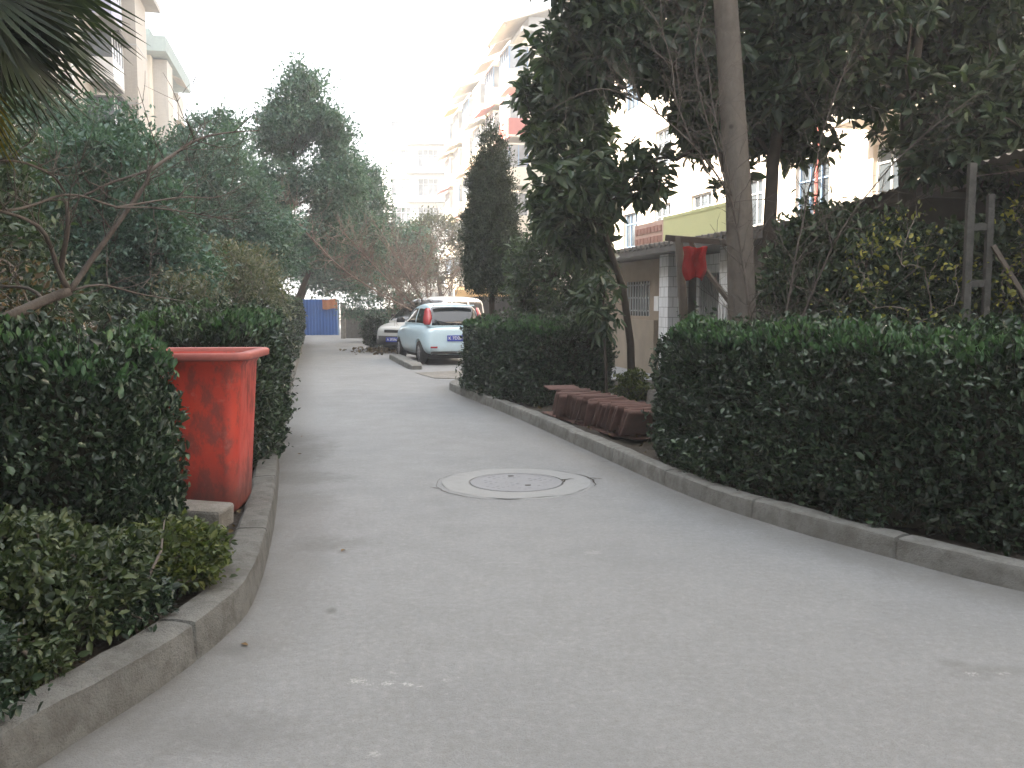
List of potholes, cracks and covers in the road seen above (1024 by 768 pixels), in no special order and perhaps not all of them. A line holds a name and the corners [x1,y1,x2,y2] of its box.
manhole cover [440,468,593,500]
